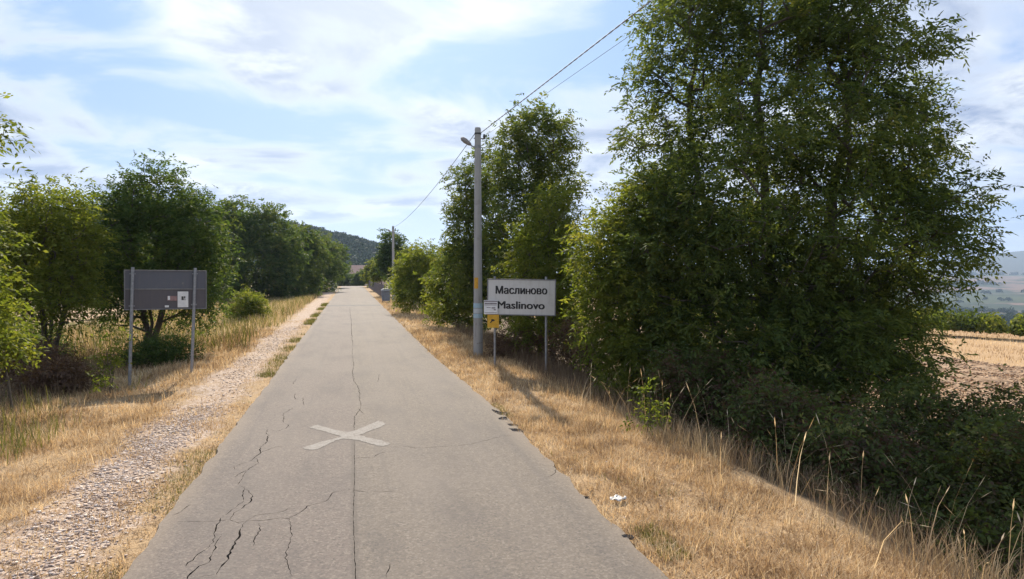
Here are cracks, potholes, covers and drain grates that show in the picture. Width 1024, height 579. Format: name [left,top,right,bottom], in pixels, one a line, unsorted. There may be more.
crack [331,315,388,579]
crack [174,408,337,579]
